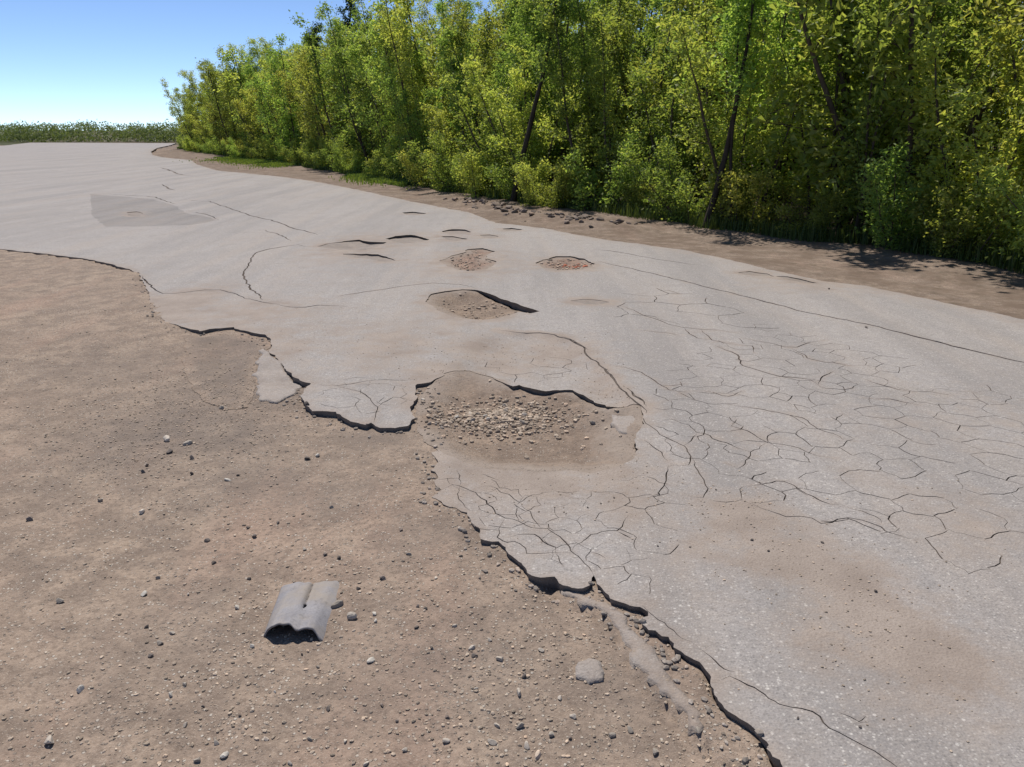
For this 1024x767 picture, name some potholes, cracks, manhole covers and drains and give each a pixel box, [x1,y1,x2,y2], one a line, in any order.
pothole [426,289,538,320]
pothole [536,256,595,270]
crack [439,263,1024,594]
pothole [415,371,644,473]
pothole [386,235,429,243]
crack [644,607,897,767]
crack [142,231,348,307]
pothole [319,240,386,250]
pothole [440,248,496,271]
